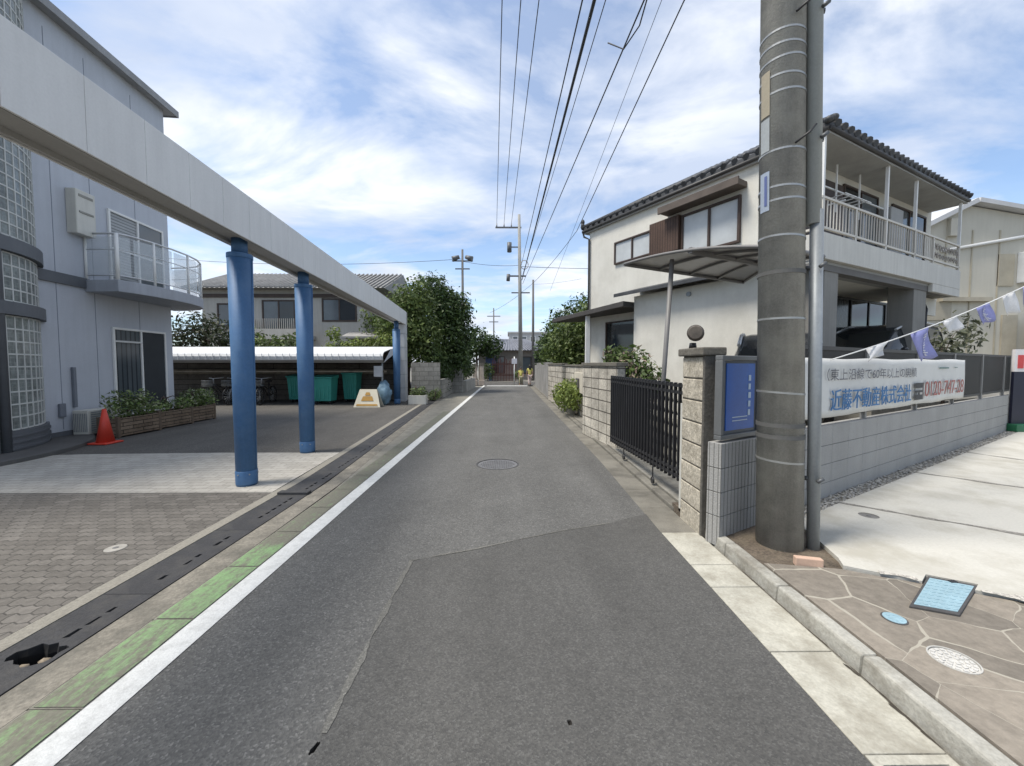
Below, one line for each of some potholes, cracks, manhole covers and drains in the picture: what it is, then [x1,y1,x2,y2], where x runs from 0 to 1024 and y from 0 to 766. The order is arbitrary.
utility cover [103,544,128,552]
pothole [5,643,69,668]
utility cover [880,612,909,625]
manhole cover [476,459,519,470]
manhole cover [926,645,984,675]
